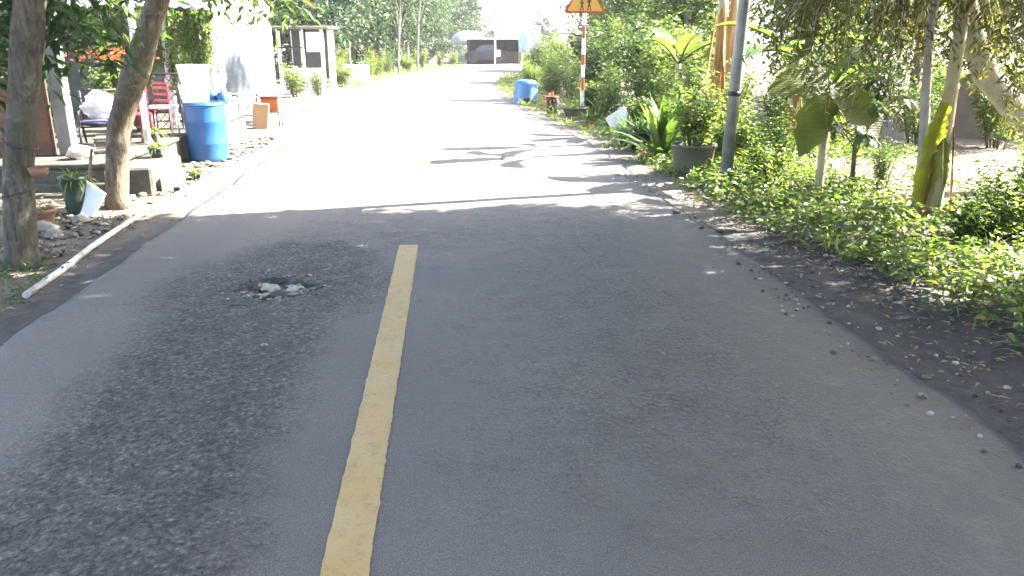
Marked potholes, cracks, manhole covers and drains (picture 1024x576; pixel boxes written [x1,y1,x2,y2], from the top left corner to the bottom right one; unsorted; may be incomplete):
pothole [214,269,331,304]
